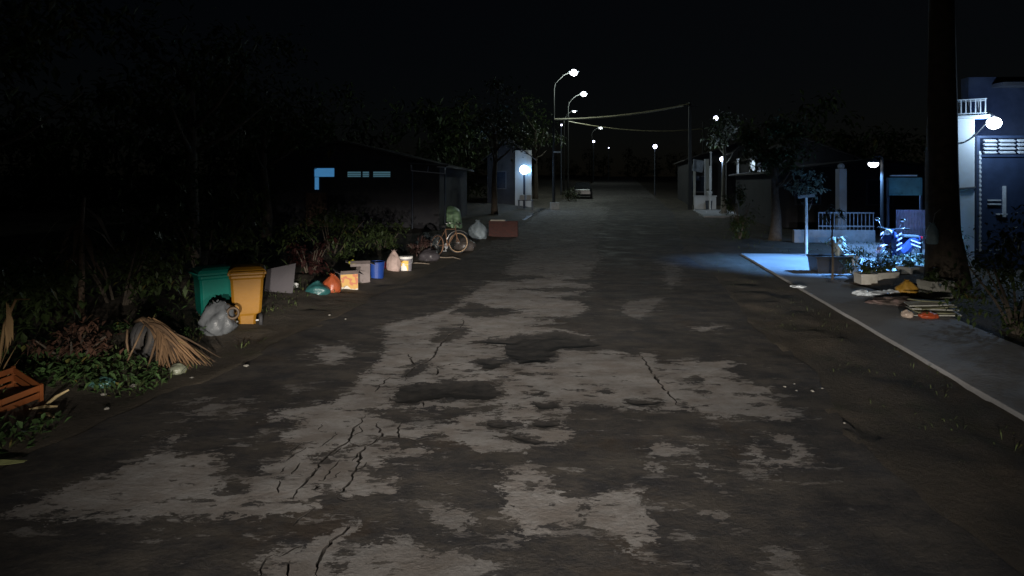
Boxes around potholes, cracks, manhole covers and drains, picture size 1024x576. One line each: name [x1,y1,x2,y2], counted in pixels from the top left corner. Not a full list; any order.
pothole [532,421,563,429]
crack [639,354,677,405]
crack [375,319,469,400]
pothole [394,381,502,404]
pothole [479,331,602,364]
pothole [475,359,506,369]
crack [259,415,438,576]
